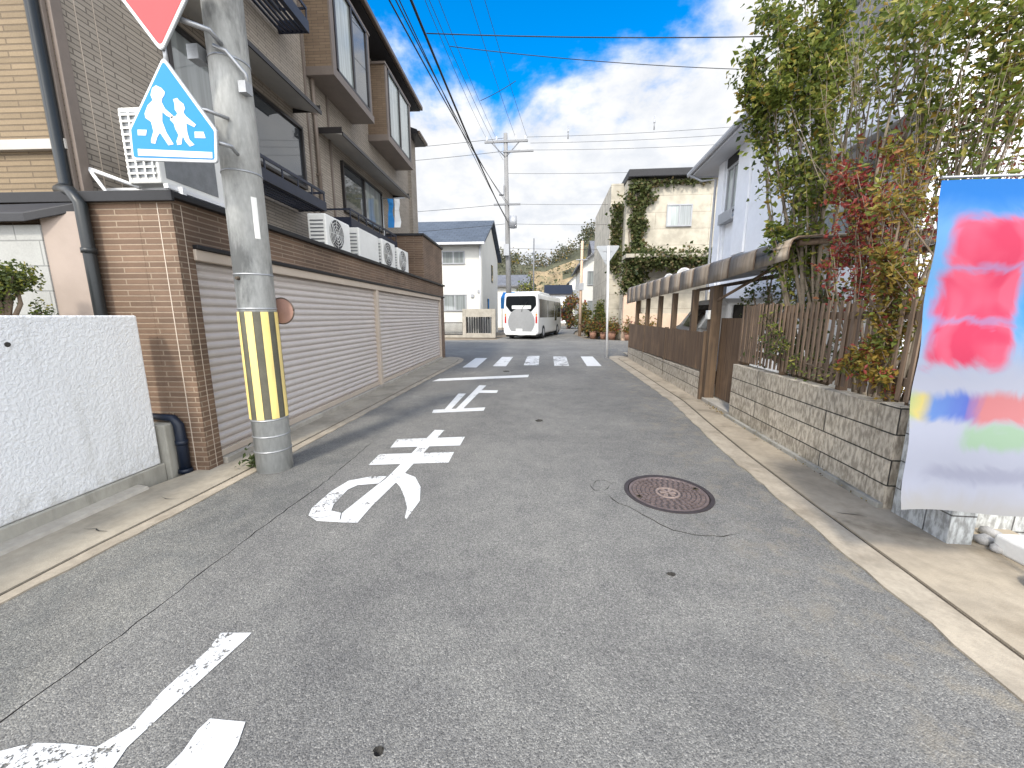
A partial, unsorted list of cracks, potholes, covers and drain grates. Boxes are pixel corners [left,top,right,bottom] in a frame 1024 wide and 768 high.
pothole [371,745,386,759]
crack [590,480,740,537]
manhole cover [624,475,715,514]
